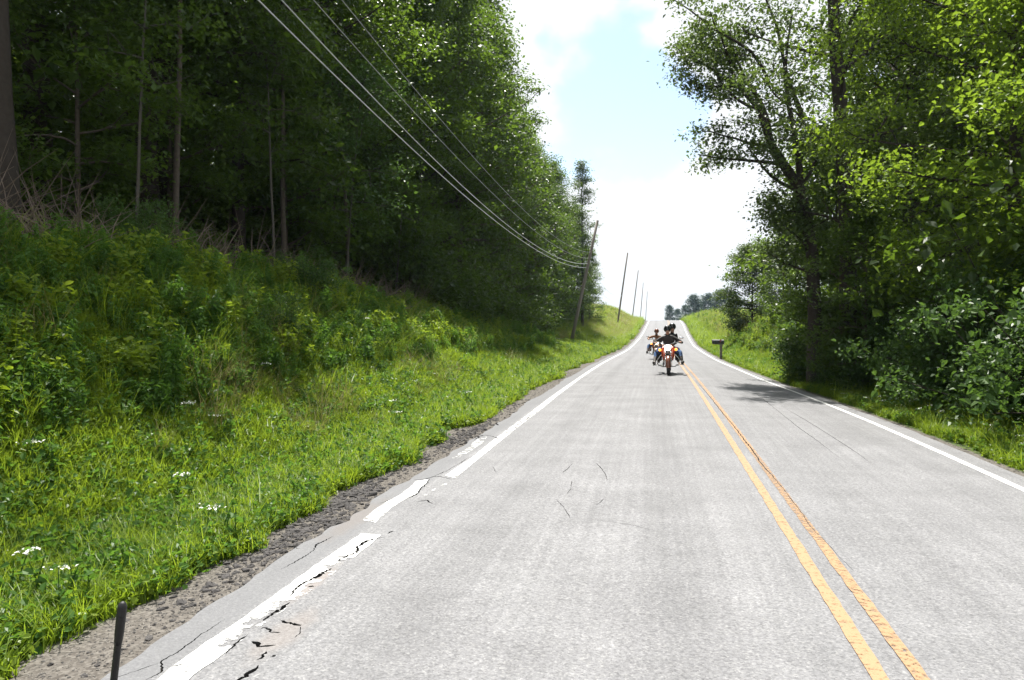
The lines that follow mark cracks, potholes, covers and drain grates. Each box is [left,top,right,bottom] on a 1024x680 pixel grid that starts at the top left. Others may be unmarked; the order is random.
crack [122,531,393,680]
